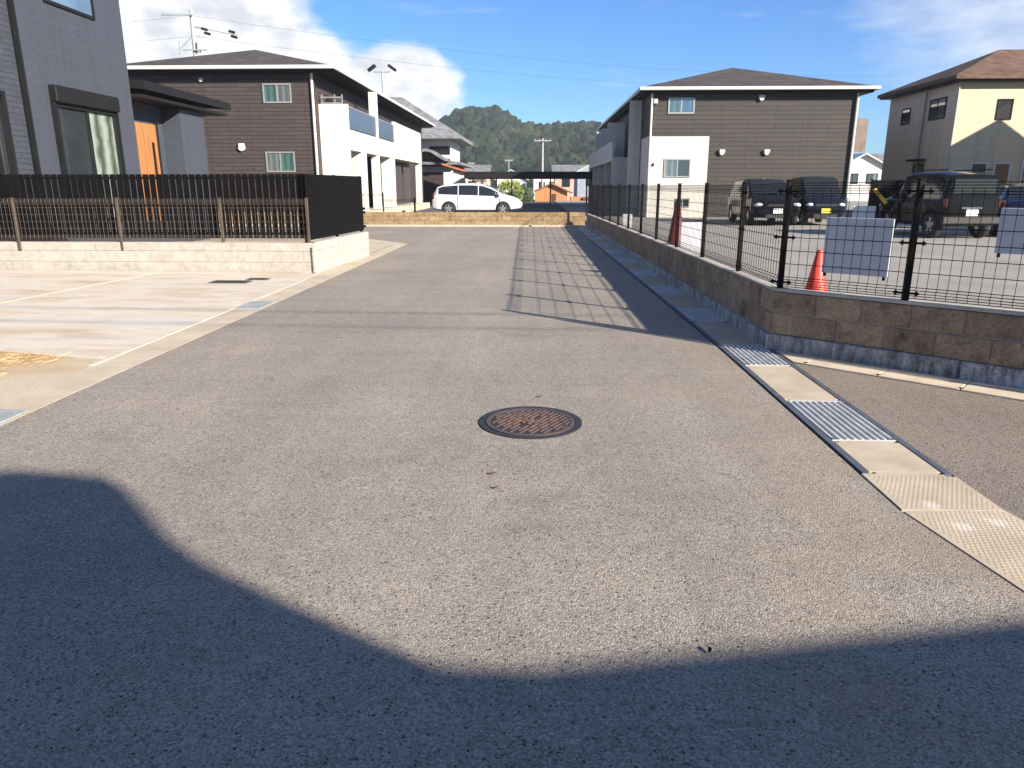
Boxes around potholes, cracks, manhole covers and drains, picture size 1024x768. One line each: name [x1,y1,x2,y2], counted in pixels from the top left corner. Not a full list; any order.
drain grate [780,400,904,443]
drain grate [234,301,275,309]
drain grate [717,344,794,367]
manhole cover [479,406,582,439]
drain grate [673,308,726,324]
